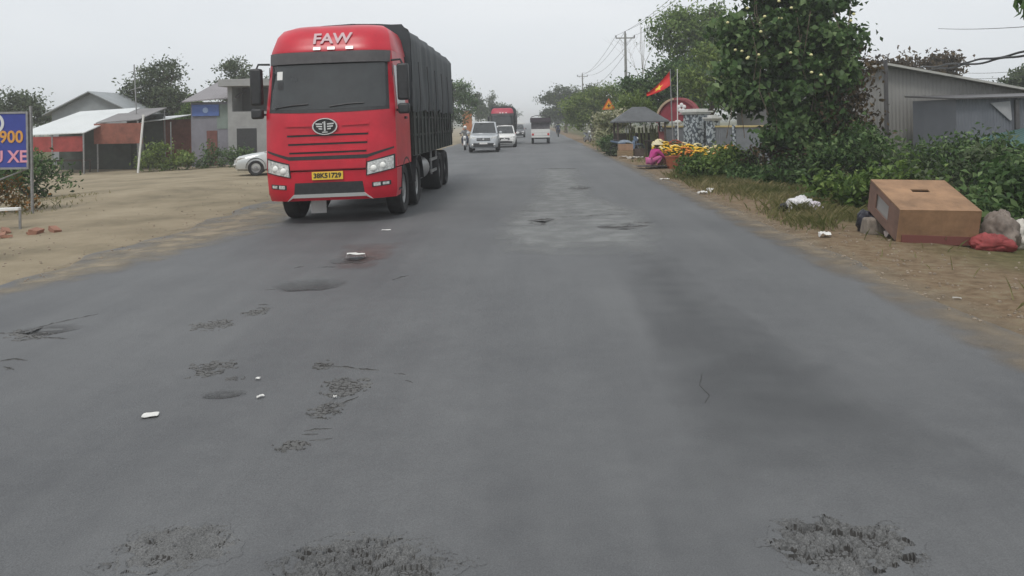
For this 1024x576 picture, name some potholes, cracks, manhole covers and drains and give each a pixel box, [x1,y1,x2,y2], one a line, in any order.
crack [0,314,97,341]
pothole [253,531,487,576]
pothole [80,519,246,576]
pothole [753,513,931,576]
